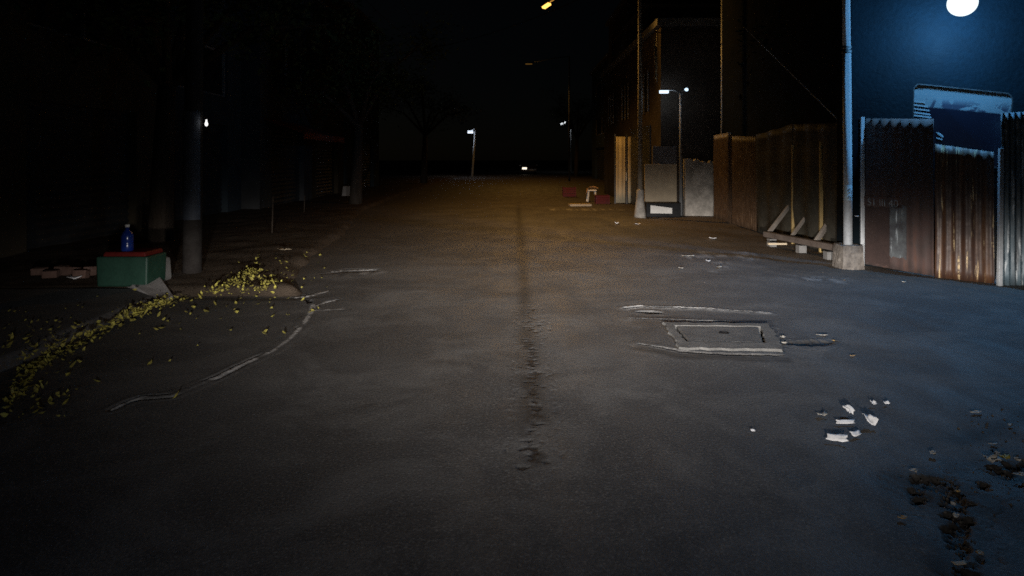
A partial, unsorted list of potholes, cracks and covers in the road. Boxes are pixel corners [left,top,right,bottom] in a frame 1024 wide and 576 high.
manhole cover [662,322,783,352]
pothole [868,464,1022,576]
pothole [940,447,1024,501]
